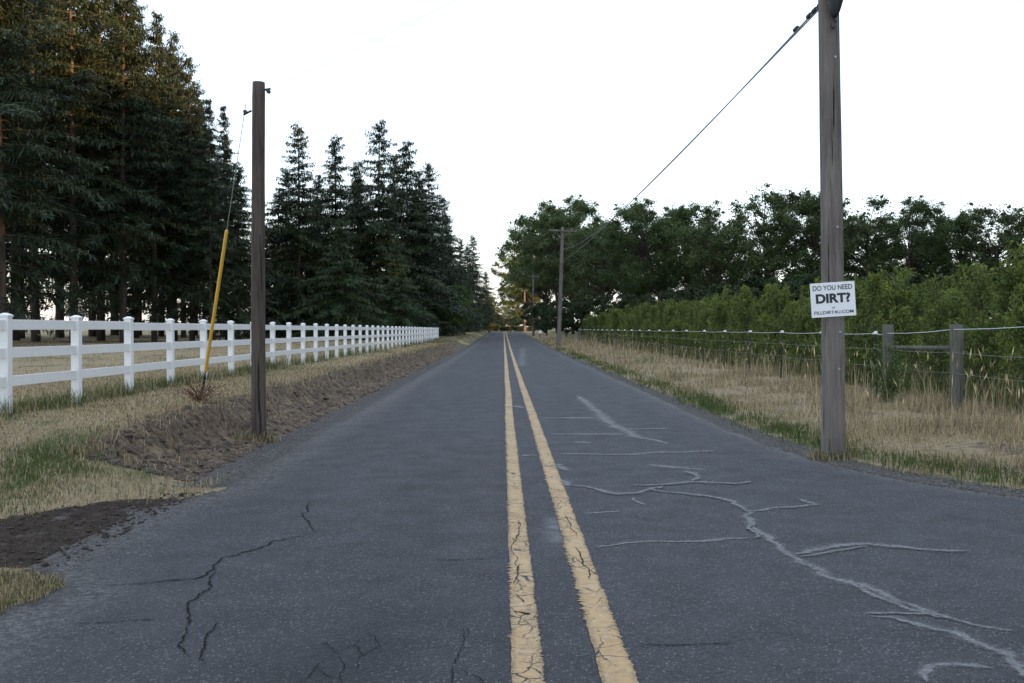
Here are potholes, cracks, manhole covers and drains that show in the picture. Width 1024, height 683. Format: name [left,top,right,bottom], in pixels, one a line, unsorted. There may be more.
crack [555,396,1024,682]
crack [103,501,316,661]
